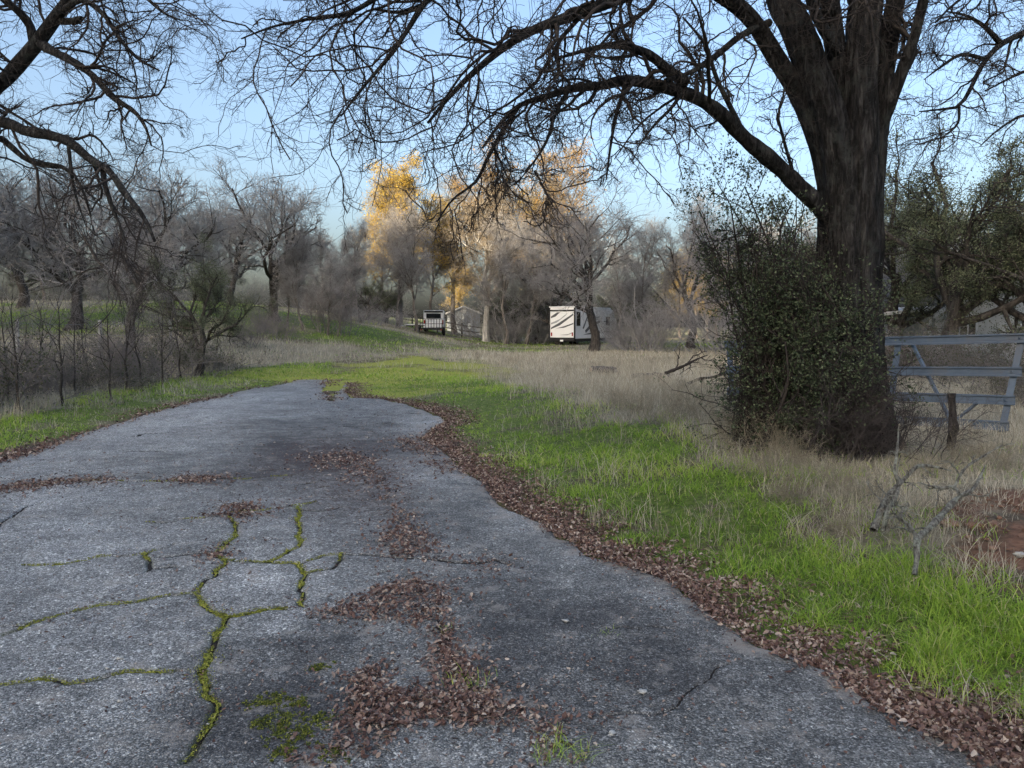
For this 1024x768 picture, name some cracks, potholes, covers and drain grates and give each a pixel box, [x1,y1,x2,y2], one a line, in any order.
crack [0,482,489,764]
crack [611,664,730,716]
